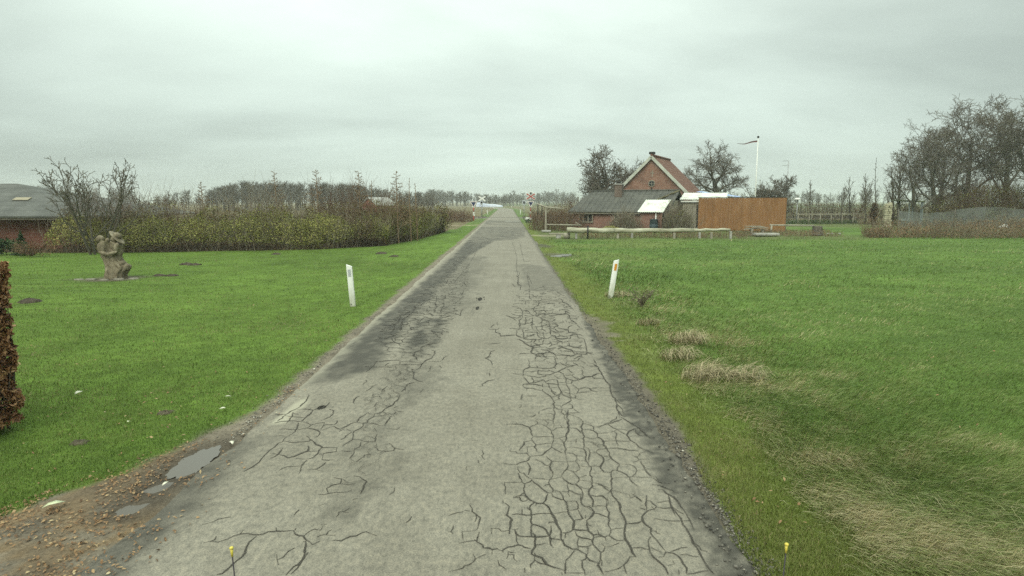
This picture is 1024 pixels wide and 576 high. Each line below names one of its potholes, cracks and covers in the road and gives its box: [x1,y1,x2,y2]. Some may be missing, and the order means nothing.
crack [245,236,491,489]
crack [203,476,377,575]
crack [448,285,713,574]
